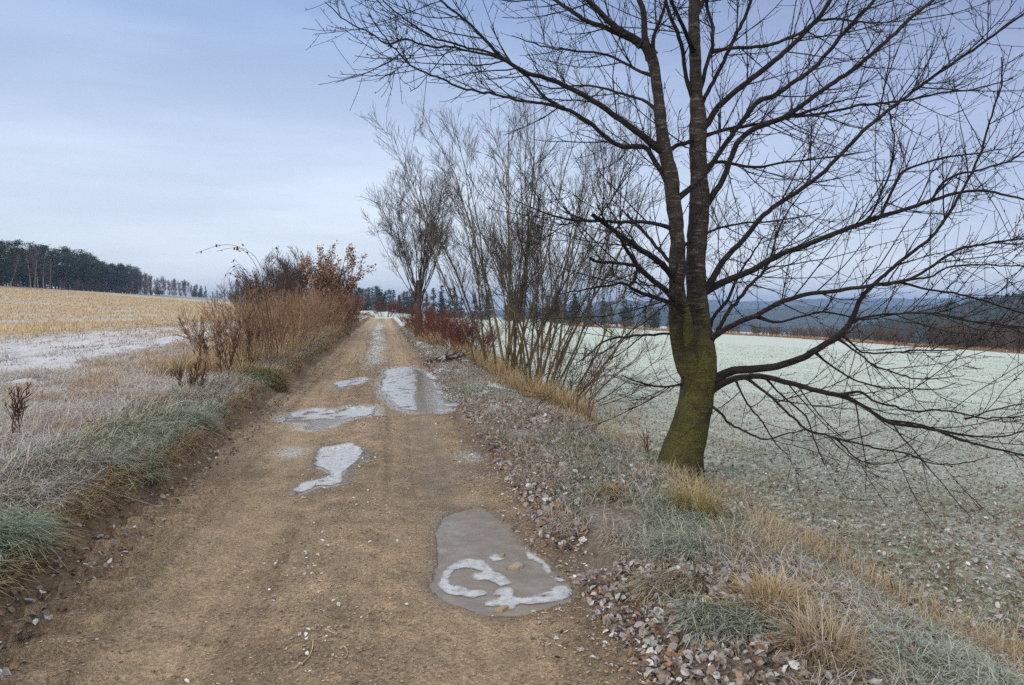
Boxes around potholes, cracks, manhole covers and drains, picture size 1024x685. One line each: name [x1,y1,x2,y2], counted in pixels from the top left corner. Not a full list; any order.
pothole [429,506,580,613]
pothole [295,448,364,496]
